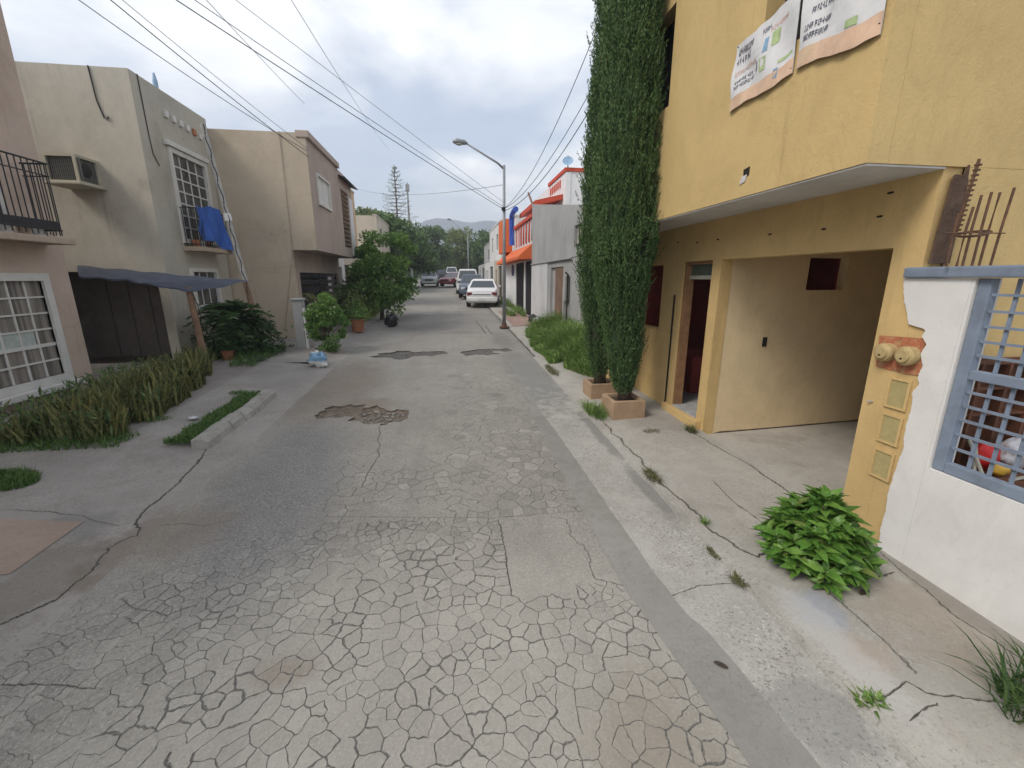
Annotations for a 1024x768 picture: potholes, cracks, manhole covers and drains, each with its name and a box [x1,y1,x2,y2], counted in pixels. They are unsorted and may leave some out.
pothole [371,351,448,360]
crack [0,370,750,768]
pothole [315,404,409,425]
crack [909,703,938,721]
pothole [460,348,513,356]
